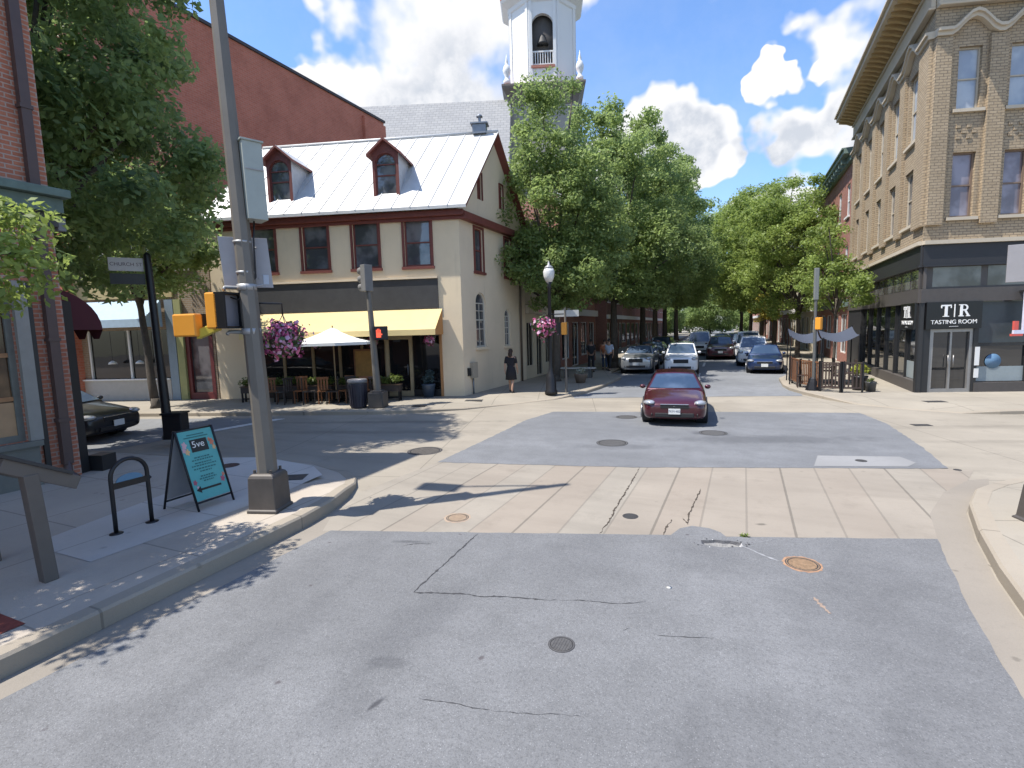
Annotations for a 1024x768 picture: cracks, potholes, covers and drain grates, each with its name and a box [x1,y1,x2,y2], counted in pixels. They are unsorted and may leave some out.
manhole cover [407,447,442,455]
manhole cover [782,556,823,573]
crack [663,490,783,562]
utility cover [548,636,575,653]
crack [409,535,638,604]
crack [423,699,578,716]
pothole [694,538,750,548]
manhole cover [444,513,471,523]
